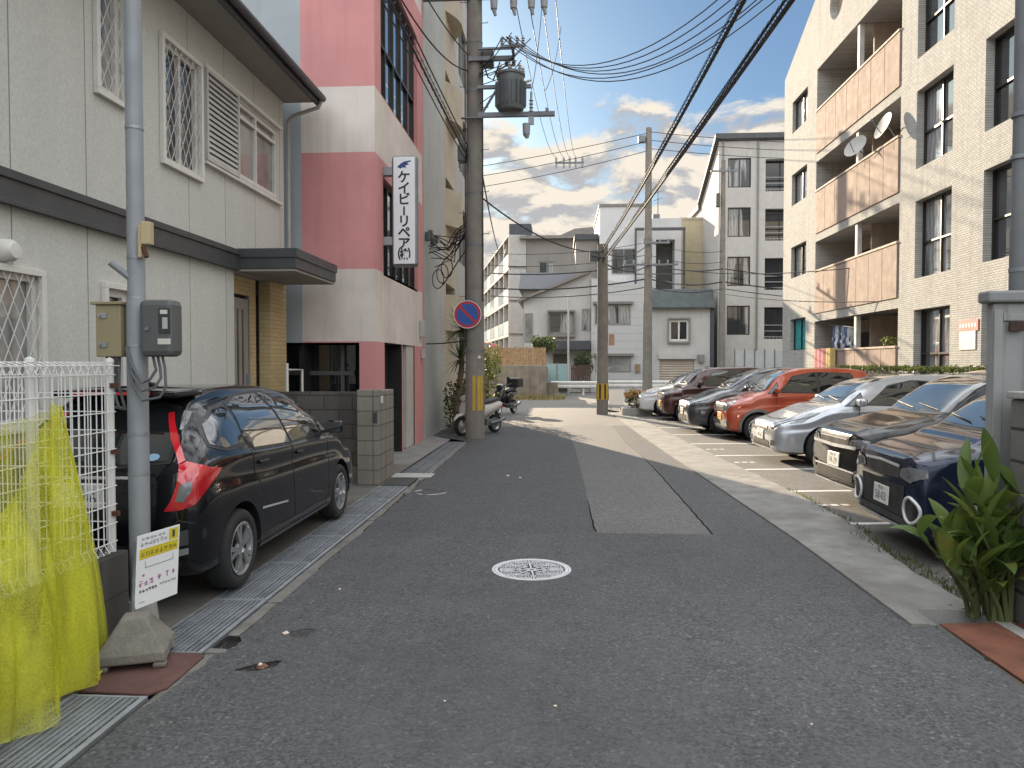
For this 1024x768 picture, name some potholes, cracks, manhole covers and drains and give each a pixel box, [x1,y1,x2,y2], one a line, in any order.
drain grate [342,499,391,516]
drain grate [170,599,268,655]
drain grate [214,562,313,601]
drain grate [308,515,372,538]
drain grate [268,535,346,564]
drain grate [0,694,148,768]
manhole cover [492,559,571,580]
pothole [234,659,282,672]
drain grate [361,486,408,501]
pothole [287,629,317,637]
pothole [214,634,244,649]
